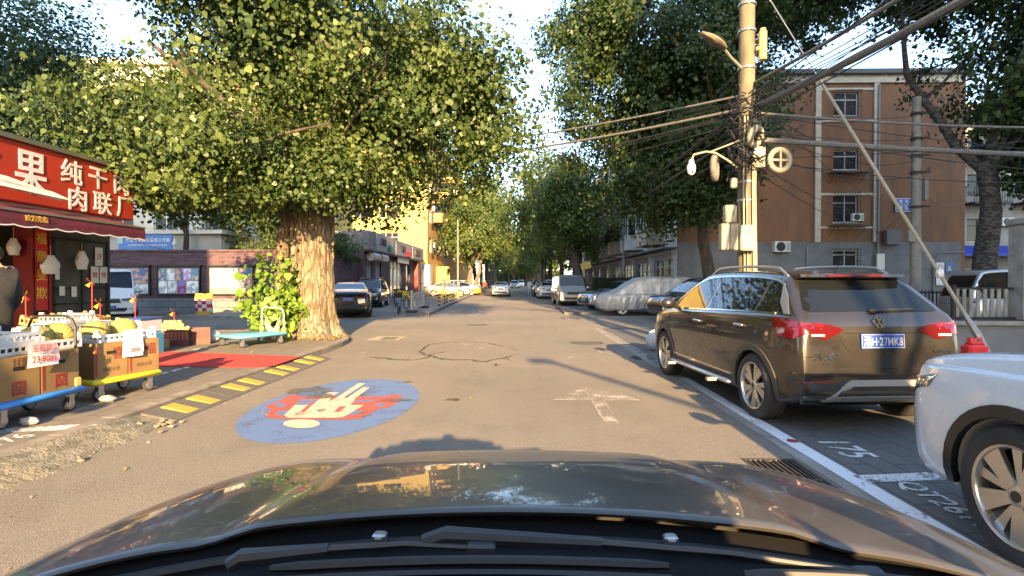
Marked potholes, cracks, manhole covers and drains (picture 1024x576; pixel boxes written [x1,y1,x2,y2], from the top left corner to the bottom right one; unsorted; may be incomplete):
drain grate [740,458,841,490]
